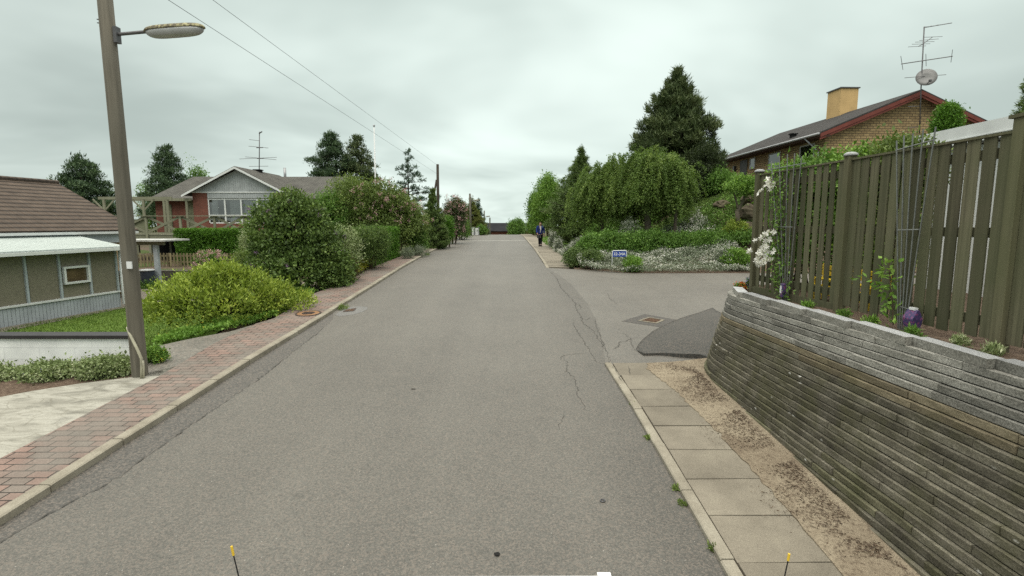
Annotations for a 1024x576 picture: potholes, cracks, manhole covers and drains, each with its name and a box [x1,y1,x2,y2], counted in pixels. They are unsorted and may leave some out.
crack [555,276,635,411]
